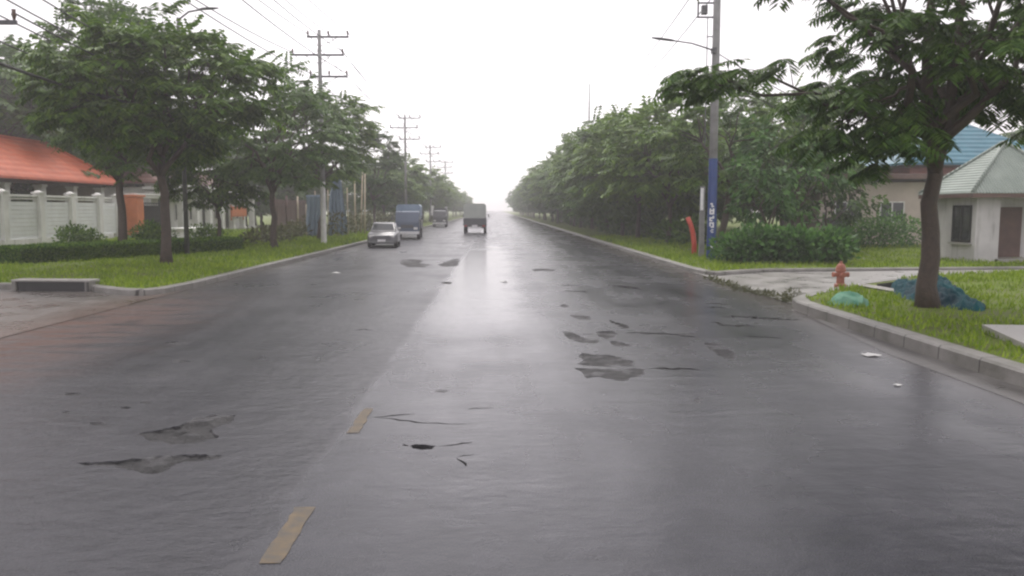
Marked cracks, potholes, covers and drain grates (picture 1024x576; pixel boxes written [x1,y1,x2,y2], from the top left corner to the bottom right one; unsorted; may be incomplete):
crack [373,408,482,424]
pothole [79,454,227,474]
crack [439,442,473,466]
pothole [438,258,460,267]
pothole [563,331,600,343]
pothole [595,331,617,339]
crack [610,320,694,337]
pothole [399,259,430,267]
pothole [578,353,635,367]
pothole [704,342,737,360]
pothole [575,368,646,381]
pothole [138,415,236,445]
